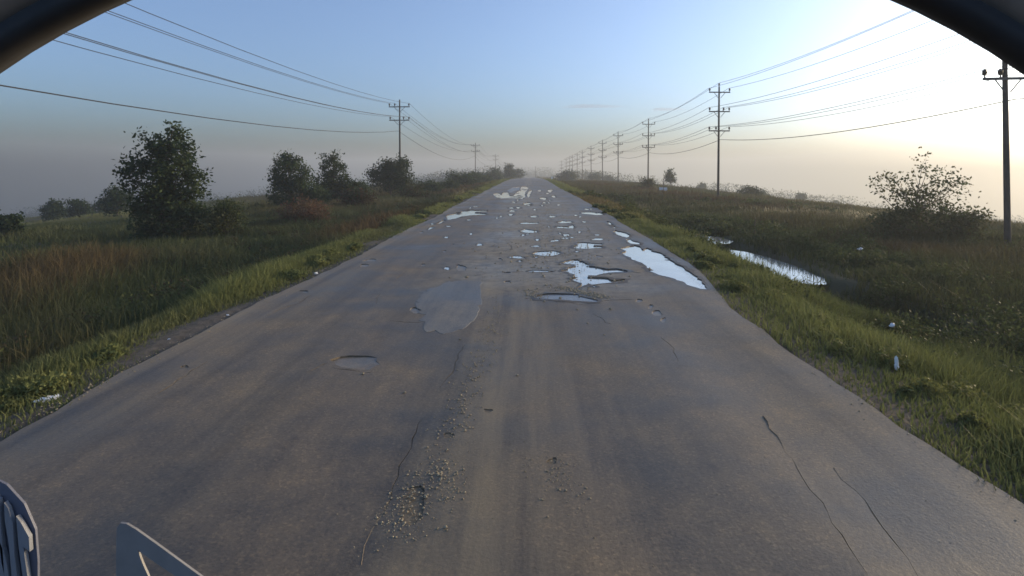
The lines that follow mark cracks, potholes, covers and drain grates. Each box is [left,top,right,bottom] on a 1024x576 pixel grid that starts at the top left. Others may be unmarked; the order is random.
pothole [492,187,530,199]
pothole [531,292,602,303]
crack [763,416,918,576]
pothole [444,209,489,220]
pothole [330,355,379,370]
pothole [554,259,633,290]
pothole [617,244,711,290]
